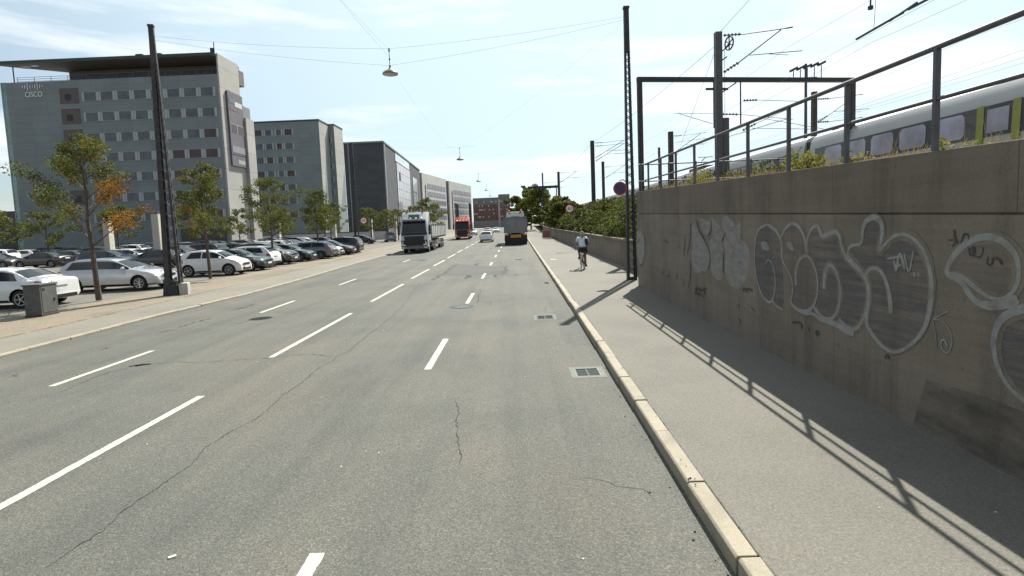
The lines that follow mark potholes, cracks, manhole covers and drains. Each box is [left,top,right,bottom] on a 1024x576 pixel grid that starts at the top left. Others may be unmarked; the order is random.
crack [433,263,518,301]
drain grate [573,368,603,377]
crack [56,282,421,561]
